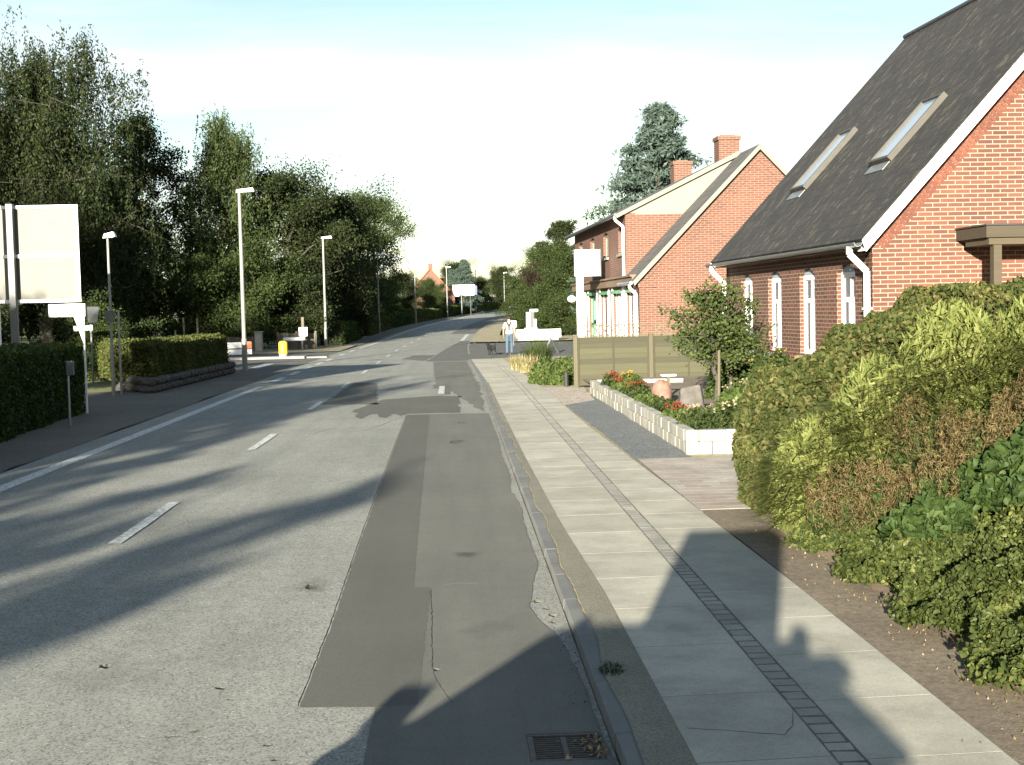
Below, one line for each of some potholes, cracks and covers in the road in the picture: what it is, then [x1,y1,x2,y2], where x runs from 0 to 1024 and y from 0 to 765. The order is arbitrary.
drain grate [526,732,607,762]
crack [693,719,793,735]
crack [430,590,453,703]
